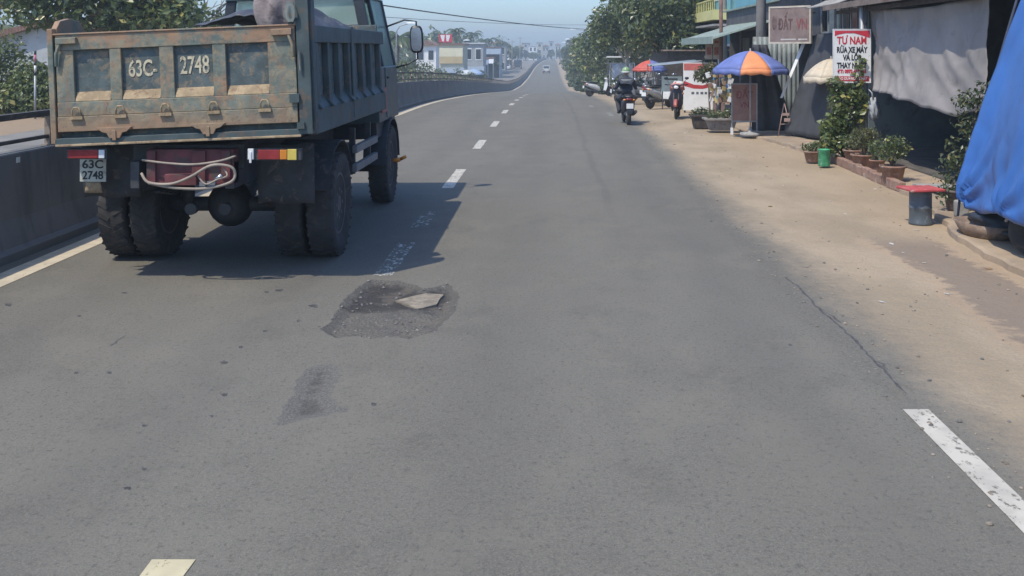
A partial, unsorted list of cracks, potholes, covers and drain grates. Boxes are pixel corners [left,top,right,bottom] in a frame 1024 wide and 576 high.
pothole [318,279,475,340]
crack [784,276,907,394]
